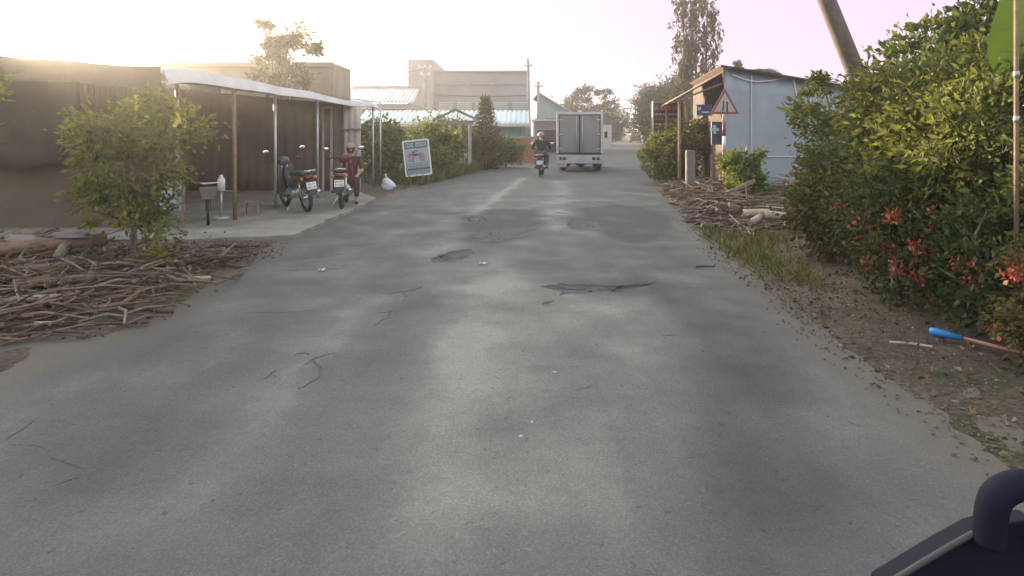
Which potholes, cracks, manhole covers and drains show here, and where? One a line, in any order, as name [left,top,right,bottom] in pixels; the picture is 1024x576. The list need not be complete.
crack [265,352,336,389]
crack [8,418,165,486]
crack [374,287,421,326]
pothole [540,282,659,296]
pothole [431,249,477,263]
